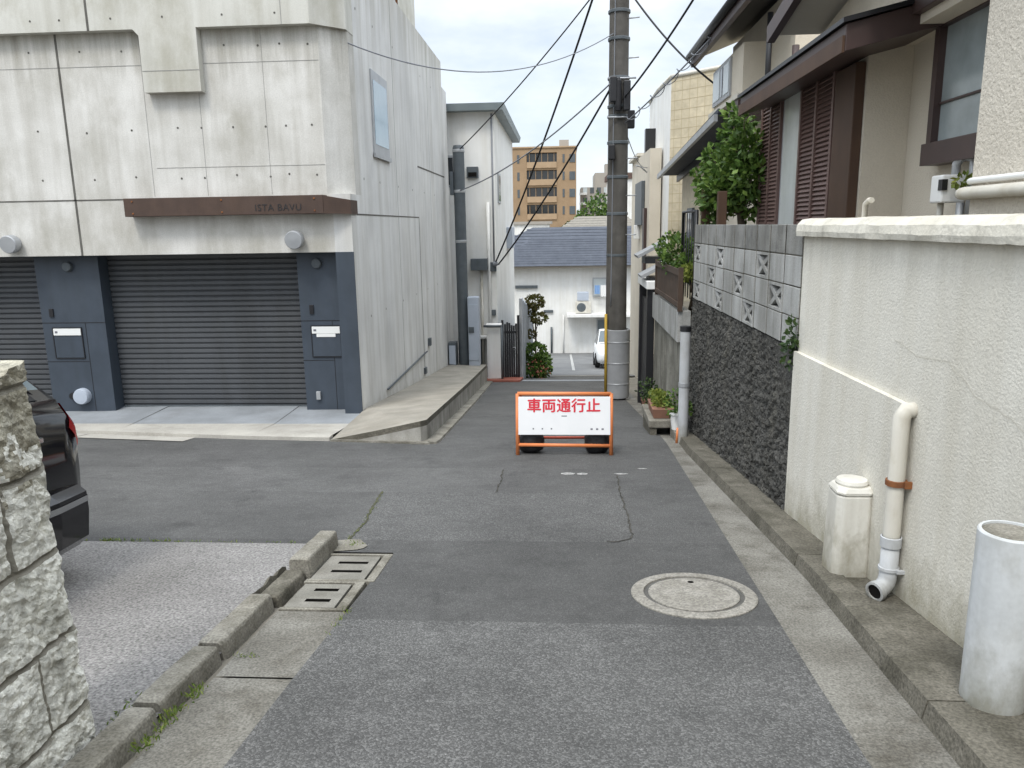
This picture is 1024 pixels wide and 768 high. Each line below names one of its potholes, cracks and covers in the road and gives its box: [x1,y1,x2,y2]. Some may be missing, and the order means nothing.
crack [607,475,634,542]
manhole cover [631,573,758,619]
crack [348,491,383,539]
